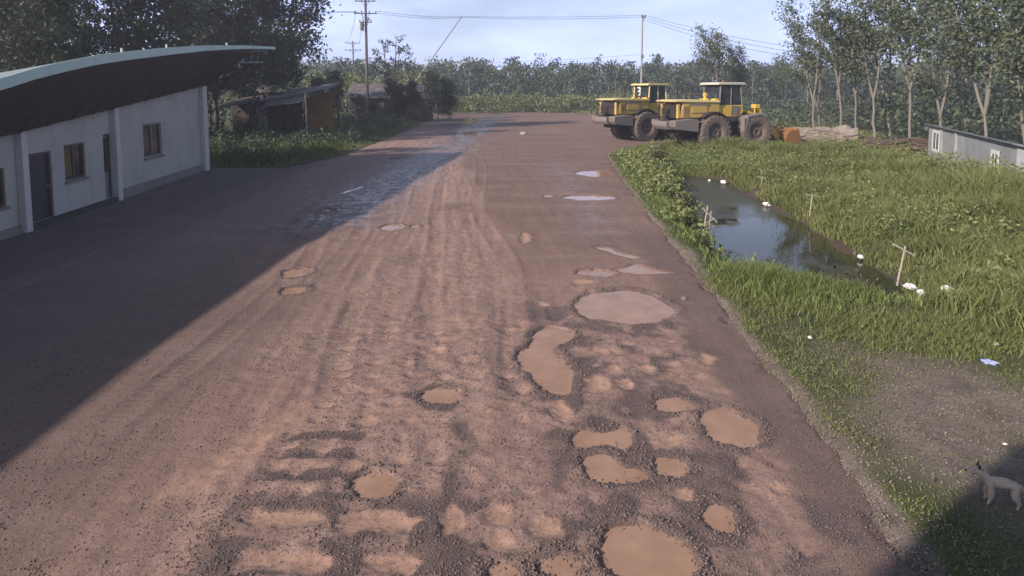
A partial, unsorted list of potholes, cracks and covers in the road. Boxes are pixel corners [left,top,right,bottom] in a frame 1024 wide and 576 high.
pothole [590,515,705,576]
pothole [648,393,697,415]
pothole [511,324,579,397]
pothole [693,497,744,536]
pothole [277,267,315,279]
pothole [691,401,768,451]
pothole [379,223,406,231]
pothole [574,447,658,487]
pothole [277,285,313,296]
pothole [647,450,694,482]
pothole [574,268,618,277]
pothole [342,466,406,501]
